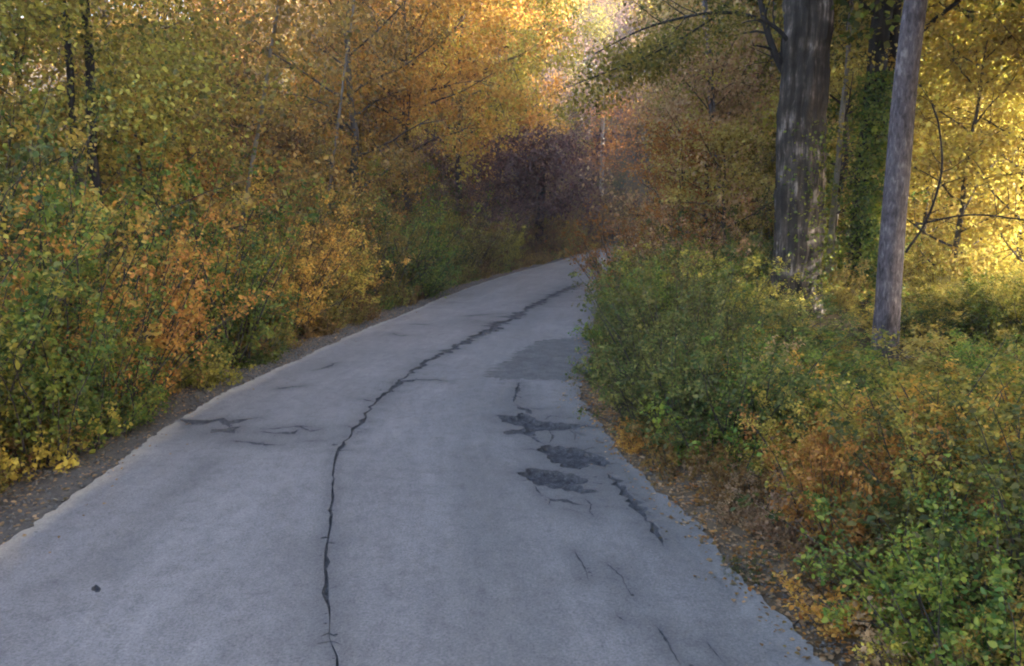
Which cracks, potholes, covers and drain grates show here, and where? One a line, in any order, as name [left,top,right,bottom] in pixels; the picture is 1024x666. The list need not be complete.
pothole [511,468,602,494]
pothole [533,445,610,472]
crack [657,627,726,666]
pothole [495,405,581,444]
crack [180,283,584,666]
crack [540,472,667,544]
crack [574,551,634,596]
